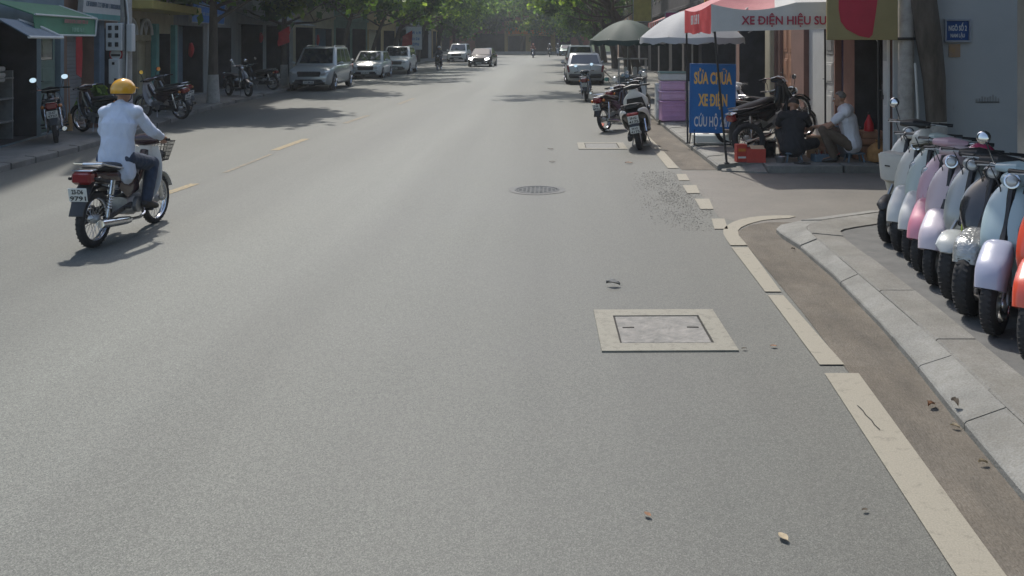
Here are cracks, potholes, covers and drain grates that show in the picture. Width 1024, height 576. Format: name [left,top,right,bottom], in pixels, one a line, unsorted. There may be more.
manhole cover [509,185,565,195]
manhole cover [594,309,739,352]
manhole cover [577,142,628,150]
